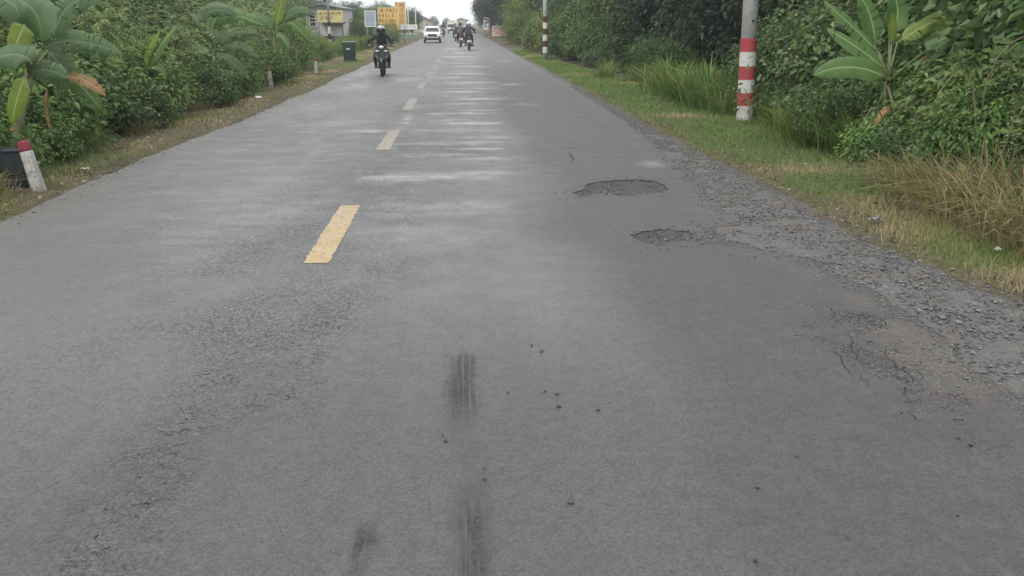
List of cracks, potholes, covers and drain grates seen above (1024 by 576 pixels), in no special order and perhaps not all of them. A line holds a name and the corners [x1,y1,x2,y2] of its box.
pothole [574,179,669,197]
pothole [631,229,693,246]
crack [795,304,964,421]
